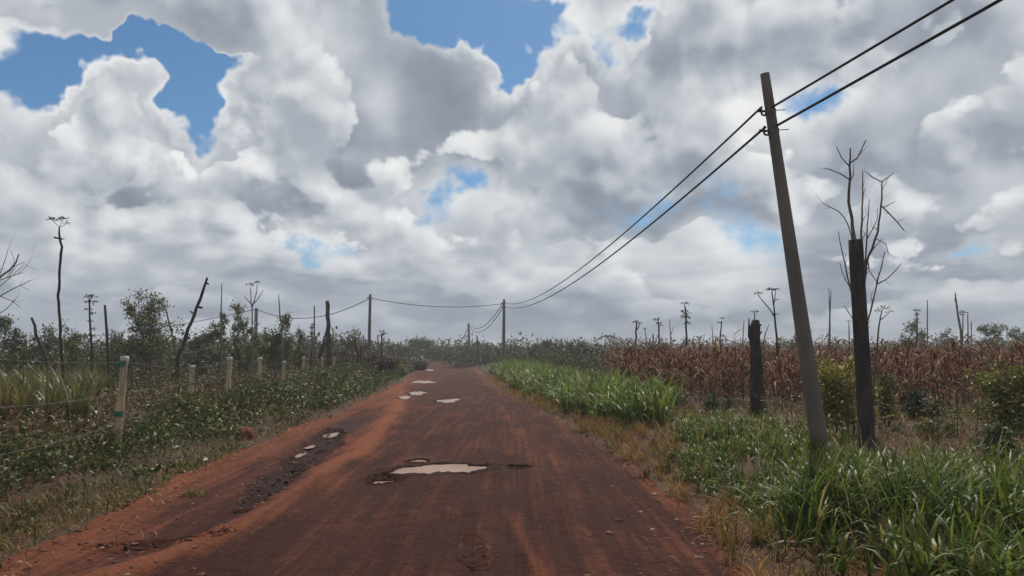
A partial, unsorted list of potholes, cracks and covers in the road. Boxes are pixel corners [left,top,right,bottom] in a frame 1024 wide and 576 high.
pothole [277,427,352,474]
pothole [360,461,509,481]
